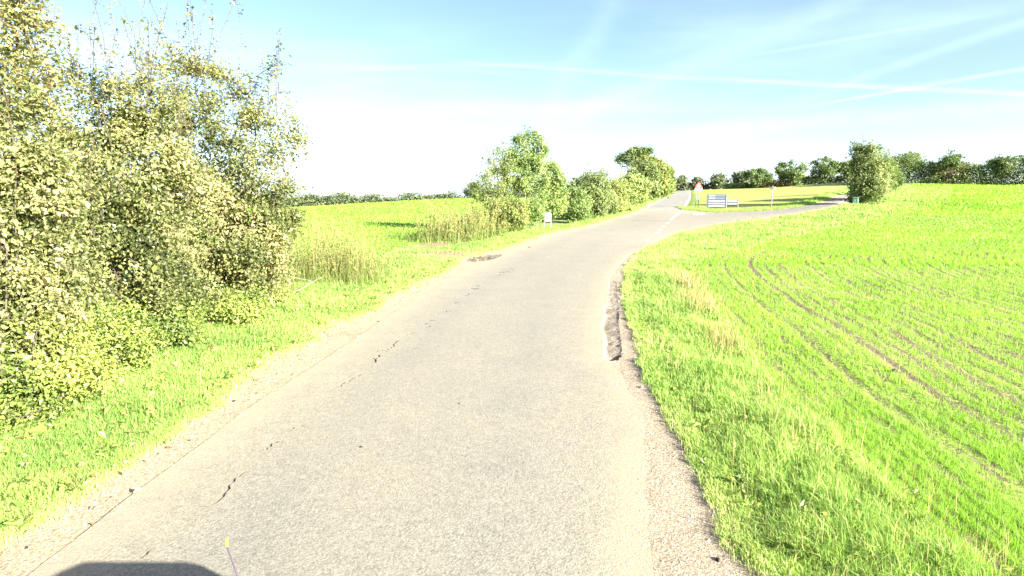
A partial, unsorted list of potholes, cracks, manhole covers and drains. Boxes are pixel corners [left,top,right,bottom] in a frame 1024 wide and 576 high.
pothole [601,280,622,361]
crack [326,288,478,398]
pothole [467,254,502,262]
crack [194,471,247,508]
